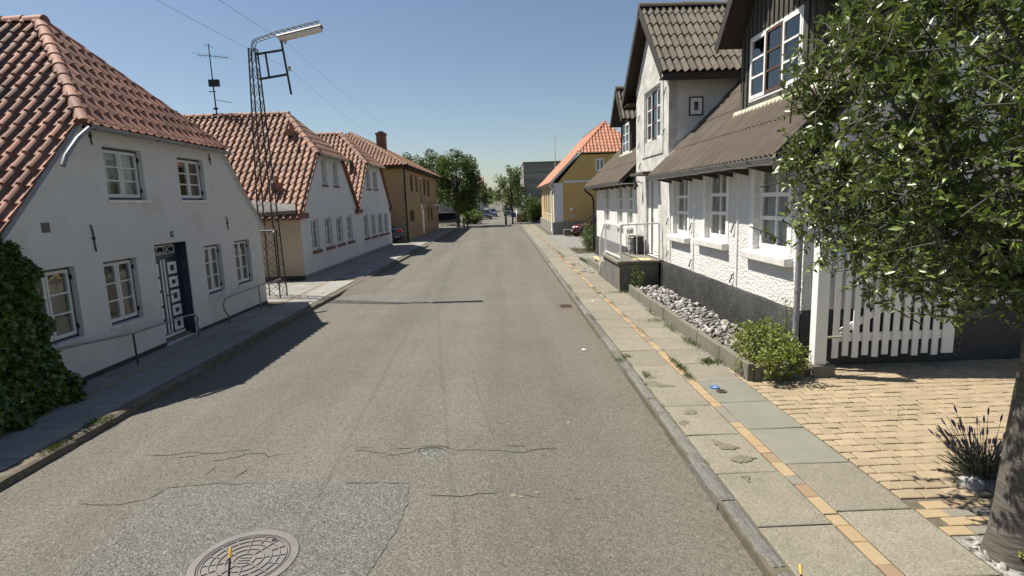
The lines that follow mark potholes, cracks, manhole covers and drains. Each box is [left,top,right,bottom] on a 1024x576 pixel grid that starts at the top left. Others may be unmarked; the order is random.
manhole cover [185,530,300,576]
crack [80,449,410,505]
crack [354,371,585,499]
pothole [418,447,446,458]
